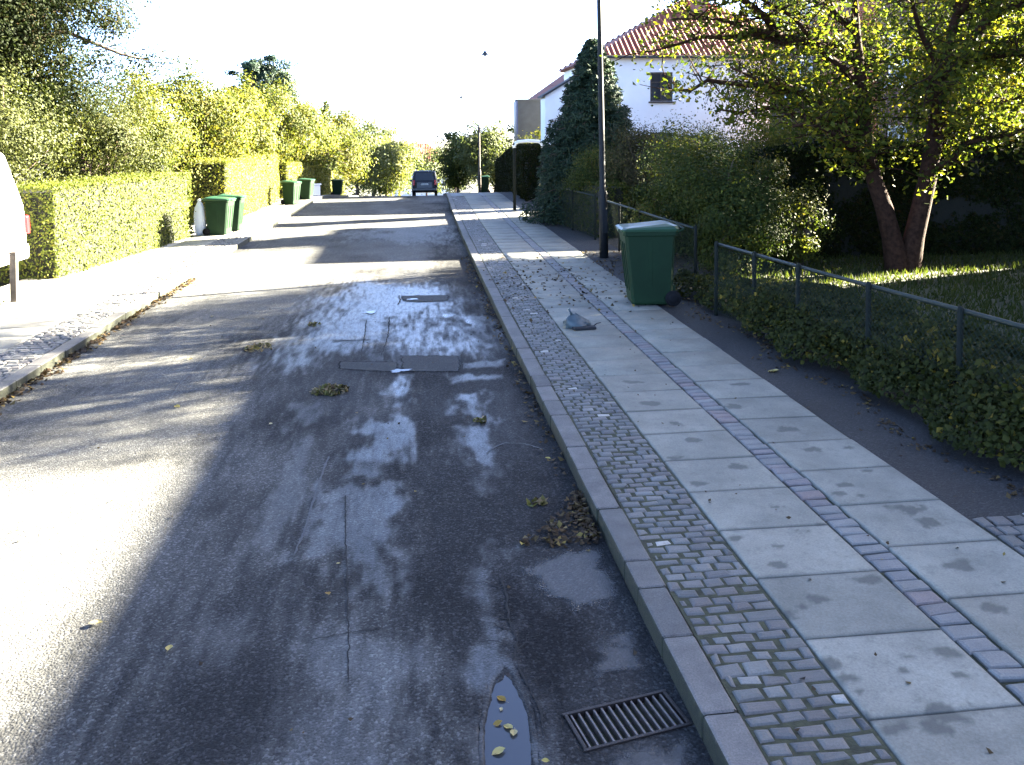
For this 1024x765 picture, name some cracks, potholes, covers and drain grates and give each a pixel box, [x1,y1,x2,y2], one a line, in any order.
crack [294,456,381,680]
drain grate [562,689,693,753]
crack [337,295,401,358]
pothole [479,653,539,765]
